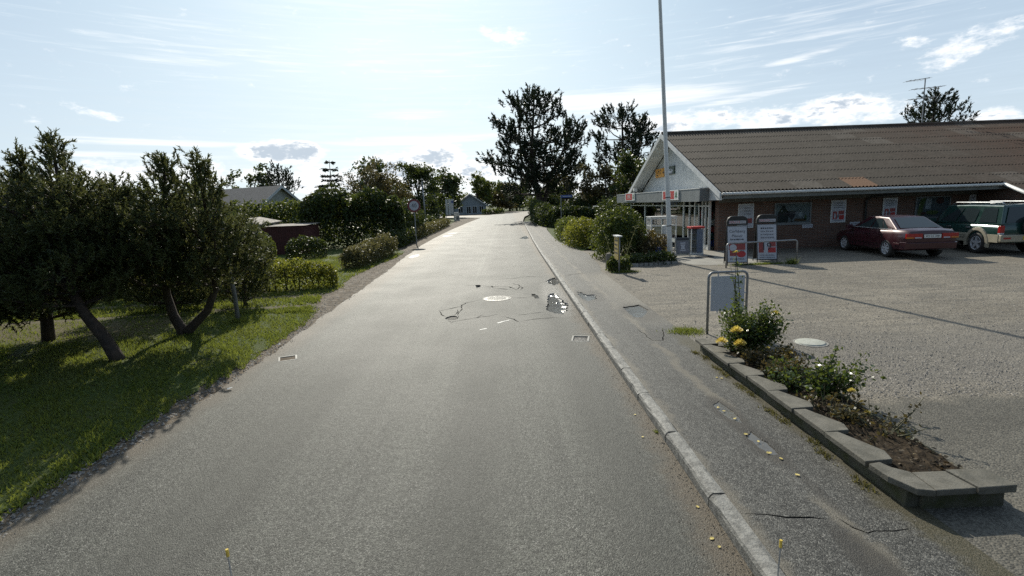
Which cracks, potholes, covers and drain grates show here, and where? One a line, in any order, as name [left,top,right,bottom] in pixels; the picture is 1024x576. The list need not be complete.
crack [745,513,907,534]
manhole cover [793,338,829,347]
pothole [546,293,569,314]
crack [440,277,555,323]
pothole [746,432,779,455]
pothole [623,305,648,317]
pothole [713,401,742,423]
